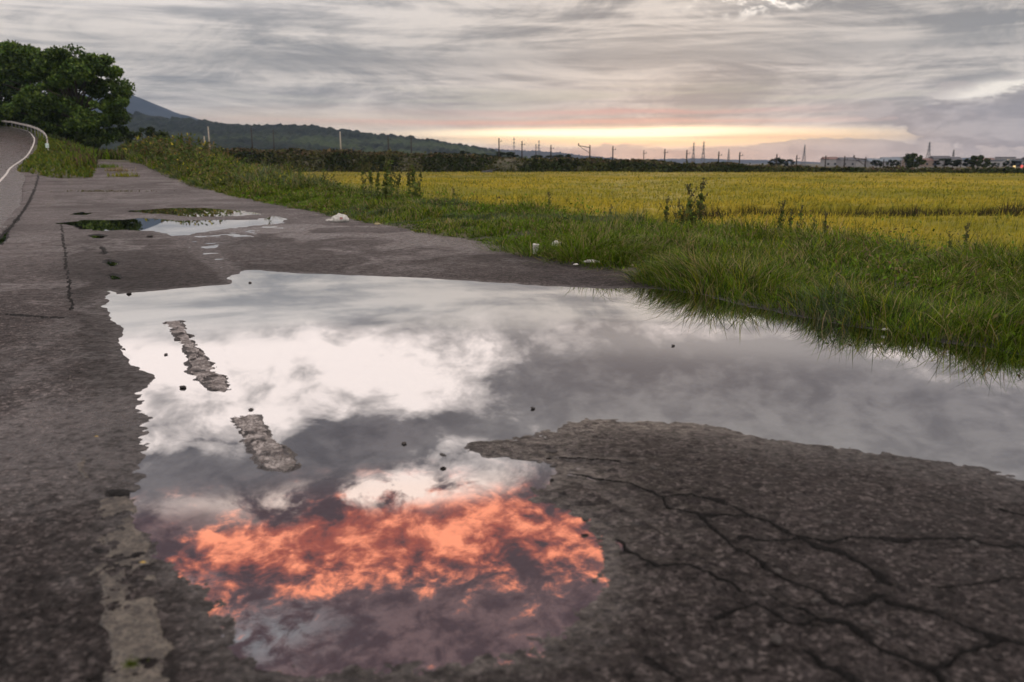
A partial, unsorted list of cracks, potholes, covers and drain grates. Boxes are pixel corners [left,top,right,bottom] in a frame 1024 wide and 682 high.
crack [5,224,75,319]
pothole [104,489,134,498]
crack [559,457,1024,682]
crack [6,174,40,232]
